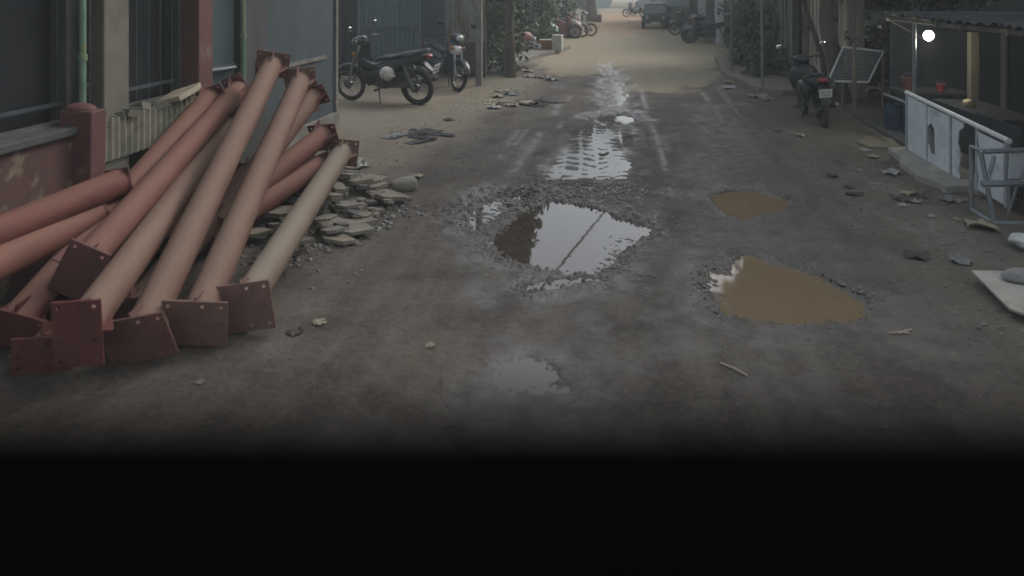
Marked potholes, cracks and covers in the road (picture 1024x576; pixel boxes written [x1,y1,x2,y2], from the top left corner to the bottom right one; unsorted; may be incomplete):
pothole [573,111,655,129]
pothole [667,241,916,347]
pothole [681,183,822,231]
pothole [434,182,687,310]
